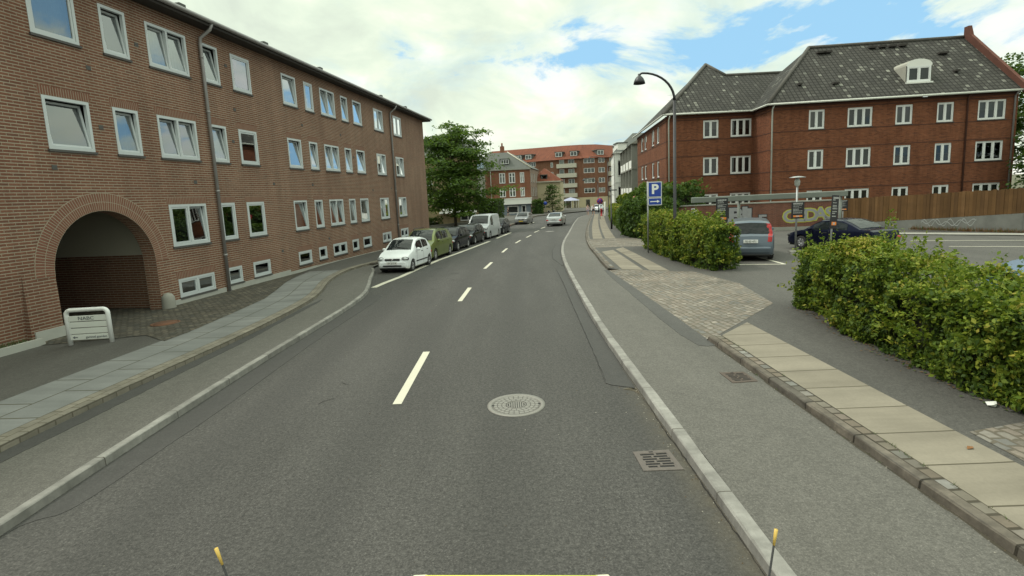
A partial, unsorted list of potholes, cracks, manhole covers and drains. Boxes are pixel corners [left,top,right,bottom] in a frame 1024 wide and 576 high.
drain grate [633,449,684,471]
manhole cover [487,394,545,417]
drain grate [719,371,758,383]
